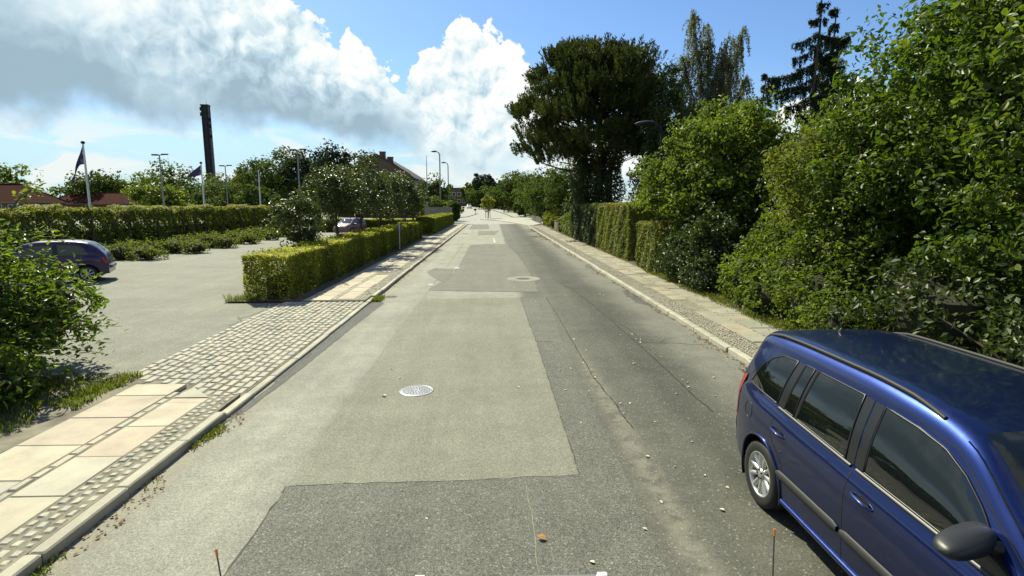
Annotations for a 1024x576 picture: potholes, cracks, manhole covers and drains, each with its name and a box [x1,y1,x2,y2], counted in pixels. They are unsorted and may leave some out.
manhole cover [399,385,433,397]
crack [552,278,713,412]
crack [526,486,540,576]
